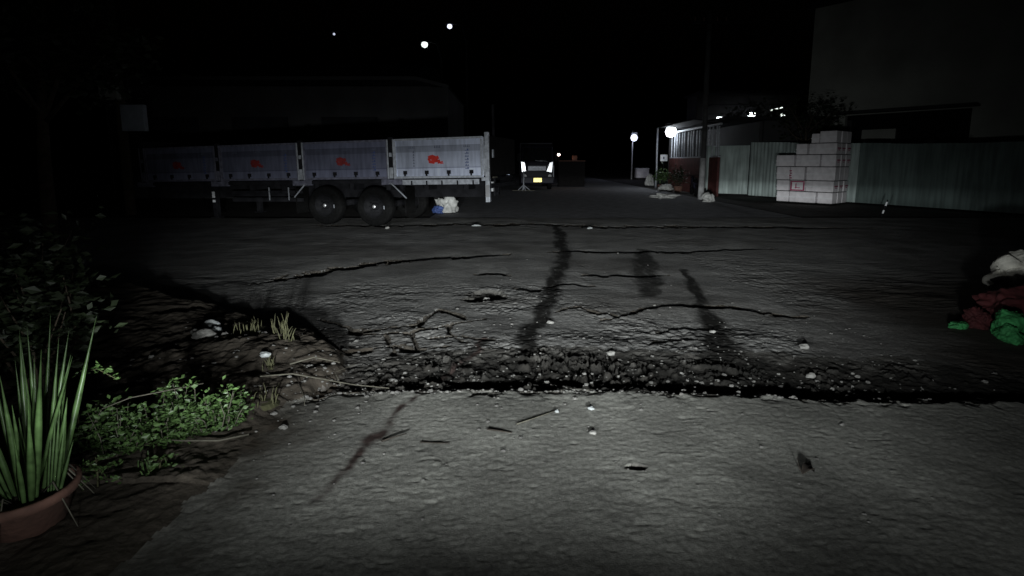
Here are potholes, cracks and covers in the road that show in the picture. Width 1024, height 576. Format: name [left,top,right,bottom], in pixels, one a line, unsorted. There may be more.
crack [318,308,496,356]
pothole [460,289,509,303]
pothole [331,345,1024,404]
crack [250,253,809,345]
crack [317,221,860,229]
